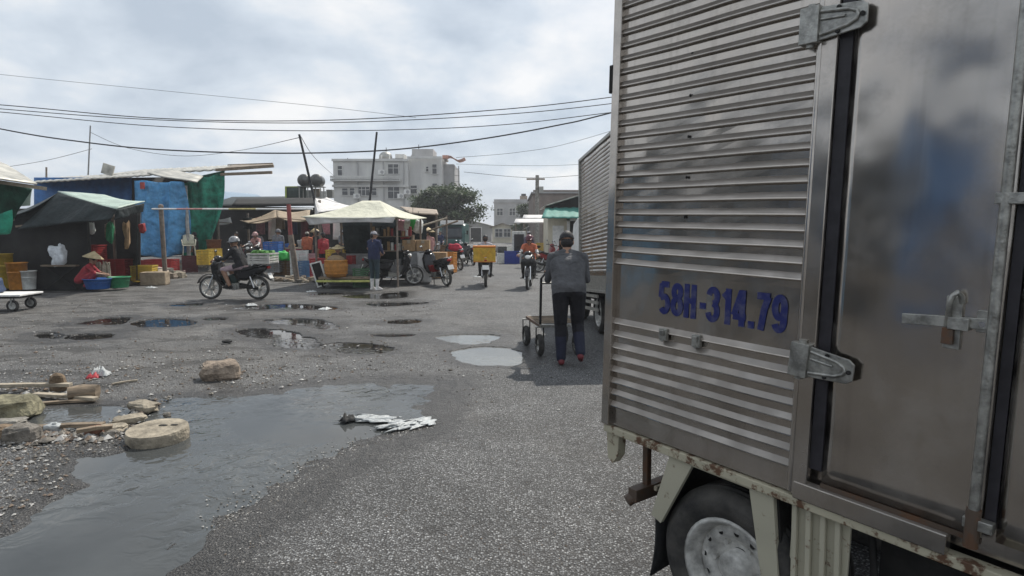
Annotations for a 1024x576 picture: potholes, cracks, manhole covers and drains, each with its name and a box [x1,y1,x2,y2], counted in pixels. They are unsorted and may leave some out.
pothole [72,317,132,325]
pothole [260,318,340,330]
pothole [233,328,323,350]
pothole [0,377,458,576]
pothole [129,318,197,327]
pothole [320,342,395,354]
pothole [434,334,501,345]
pothole [449,346,526,366]
